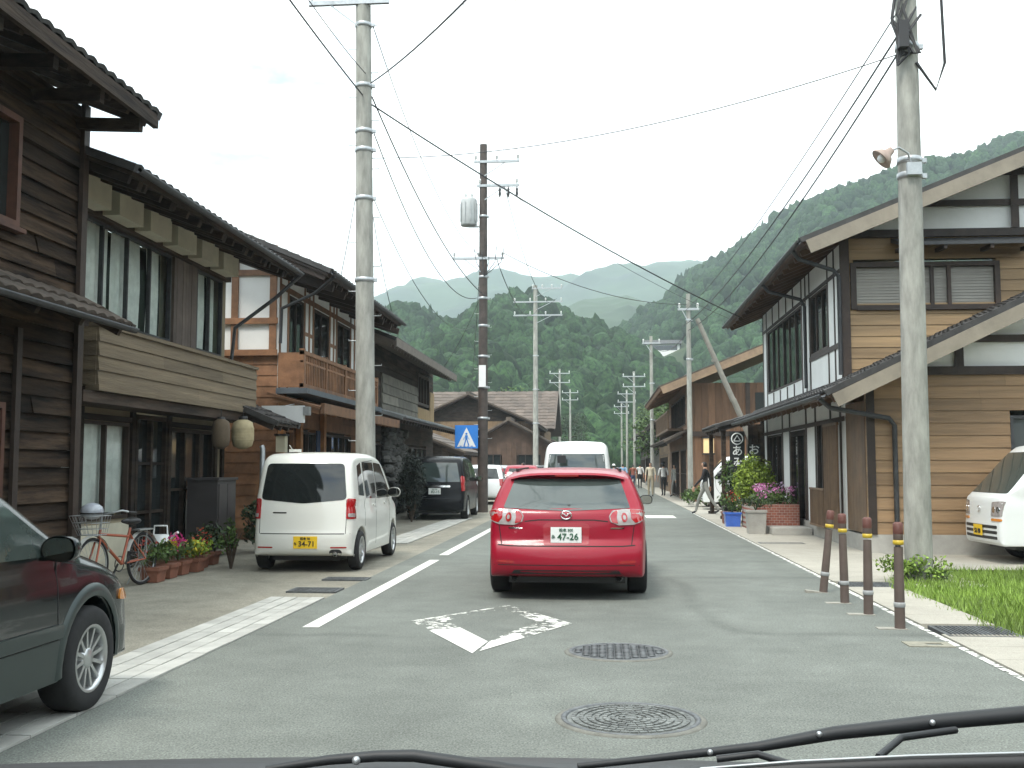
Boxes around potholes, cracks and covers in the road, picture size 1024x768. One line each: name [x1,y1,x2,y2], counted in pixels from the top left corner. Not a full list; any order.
drain grate [928,625,1024,637]
manhole cover [564,643,673,662]
manhole cover [555,702,708,739]
